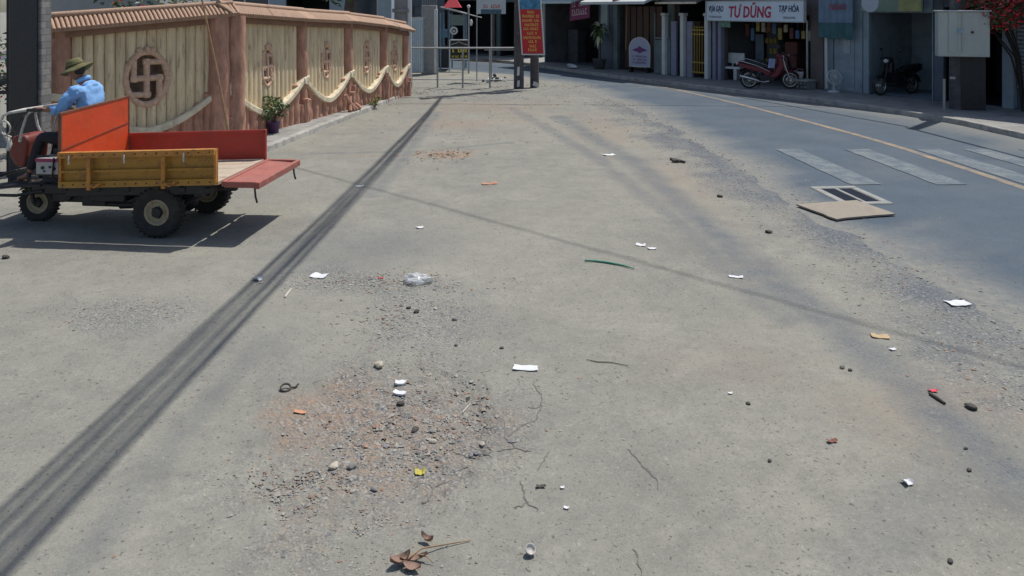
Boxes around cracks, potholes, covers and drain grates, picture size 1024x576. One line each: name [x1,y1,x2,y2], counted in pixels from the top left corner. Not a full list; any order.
crack [422,384,550,509]
crack [628,449,658,489]
pothole [231,357,507,553]
